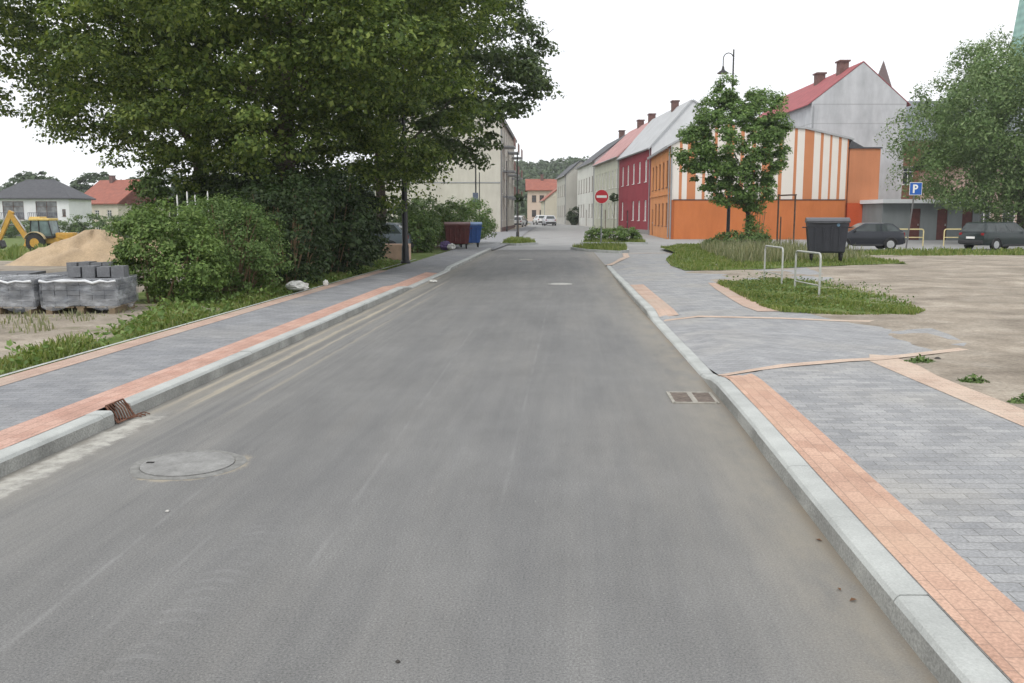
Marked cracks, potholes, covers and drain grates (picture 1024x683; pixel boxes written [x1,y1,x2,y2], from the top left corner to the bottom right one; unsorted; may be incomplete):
manhole cover [129,450,247,480]
drain grate [105,398,150,424]
drain grate [666,391,720,404]
